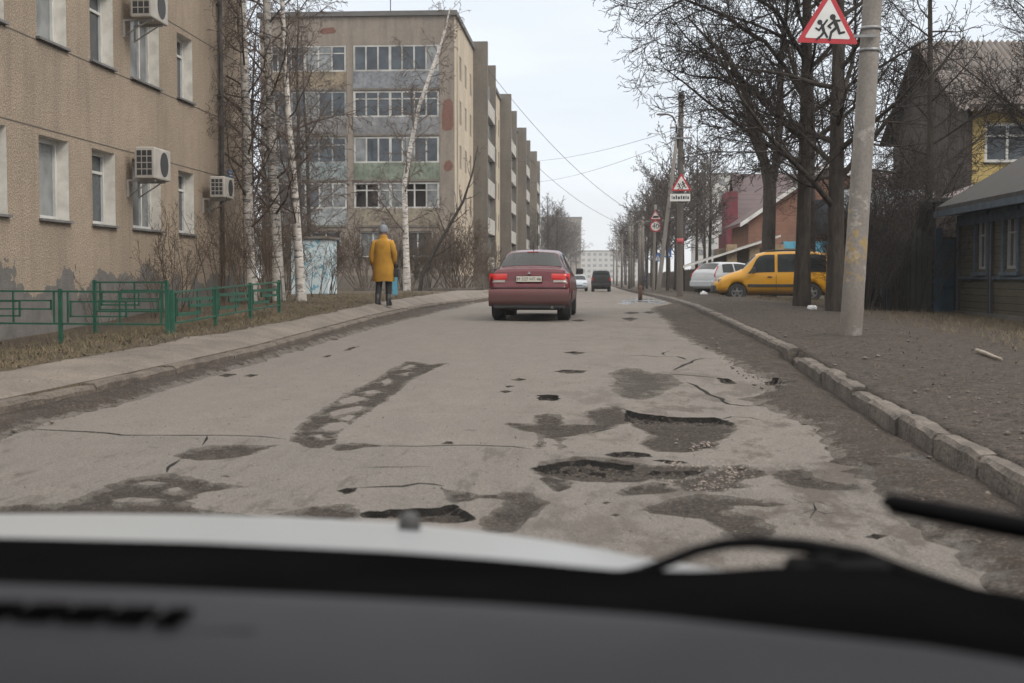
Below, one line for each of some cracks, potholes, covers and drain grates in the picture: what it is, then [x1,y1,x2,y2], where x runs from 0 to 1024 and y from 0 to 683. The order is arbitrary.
pothole [532,460,634,480]
pothole [359,504,476,523]
crack [635,351,764,421]
pothole [632,468,708,478]
pothole [624,409,734,429]
